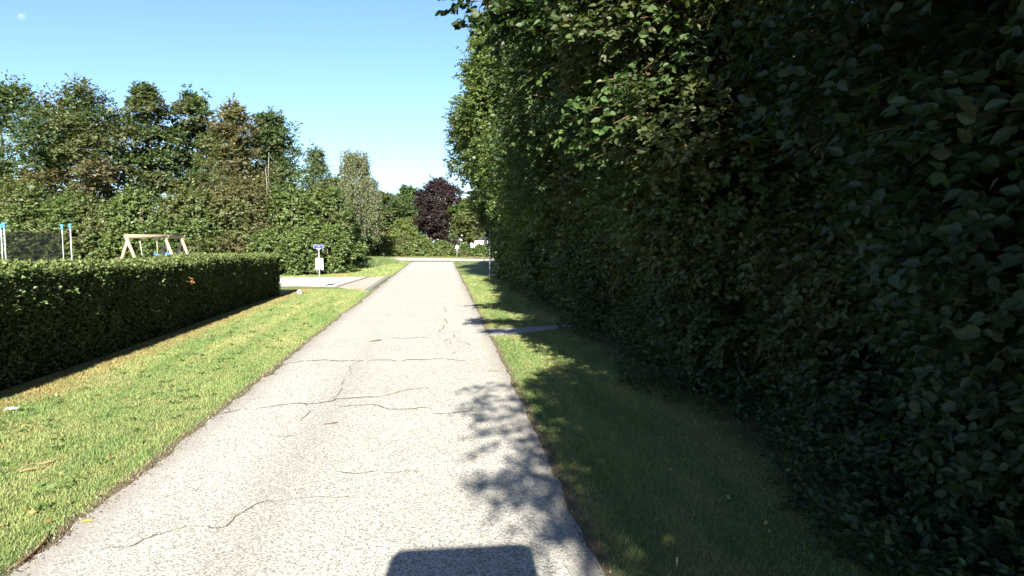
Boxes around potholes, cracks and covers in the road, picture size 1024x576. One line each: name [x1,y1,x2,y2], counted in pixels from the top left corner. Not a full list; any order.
crack [102,495,355,549]
crack [216,307,476,437]
